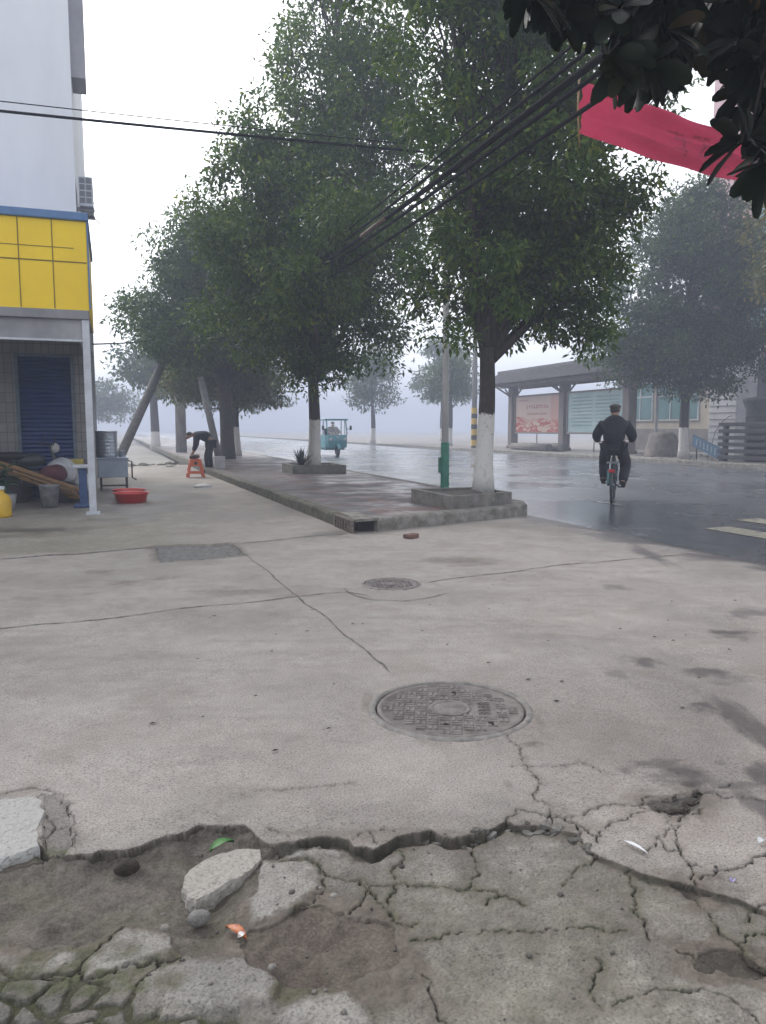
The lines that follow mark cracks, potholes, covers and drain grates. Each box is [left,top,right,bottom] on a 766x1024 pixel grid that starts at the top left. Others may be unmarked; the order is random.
drain grate [334,512,379,534]
crack [642,792,766,974]
pothole [642,791,702,816]
pothole [694,951,766,980]
manhole cover [362,578,421,590]
crack [291,841,521,919]
pothole [0,828,279,959]
crack [506,766,601,842]
manhole cover [368,681,533,742]
pothole [240,906,399,989]
